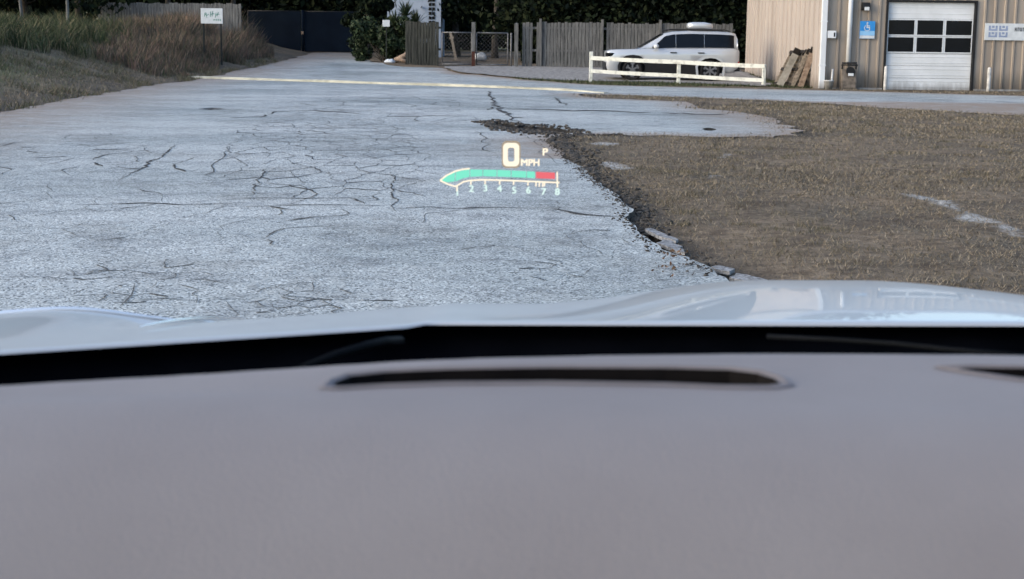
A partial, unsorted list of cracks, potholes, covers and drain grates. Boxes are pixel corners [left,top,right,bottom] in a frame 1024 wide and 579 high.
crack [226,282,355,315]
crack [543,97,644,113]
crack [11,259,220,306]
crack [2,96,623,282]
